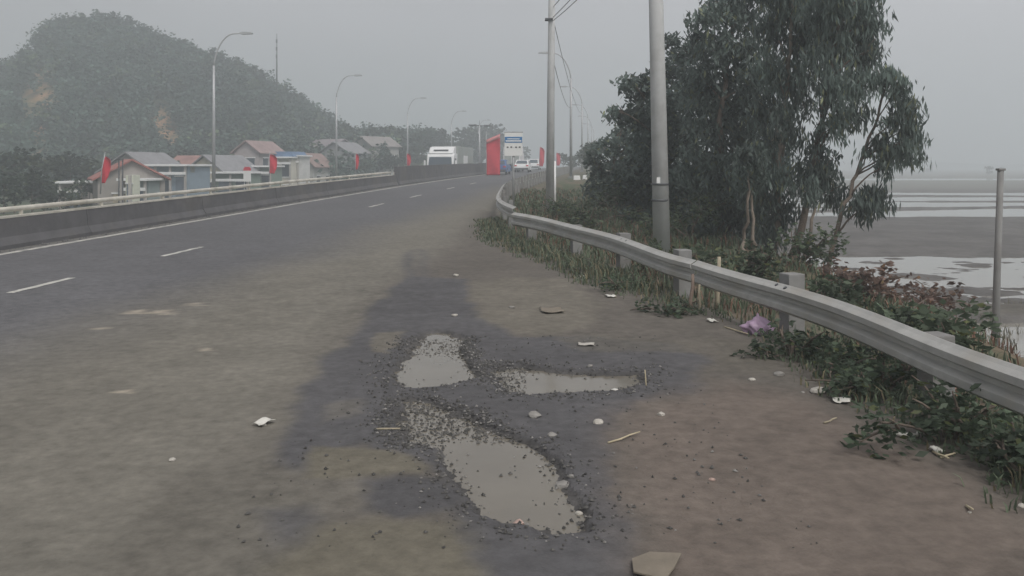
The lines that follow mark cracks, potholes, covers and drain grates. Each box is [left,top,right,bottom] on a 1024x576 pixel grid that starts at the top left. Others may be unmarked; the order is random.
pothole [486,363,648,395]
pothole [387,329,485,388]
pothole [389,395,593,535]
